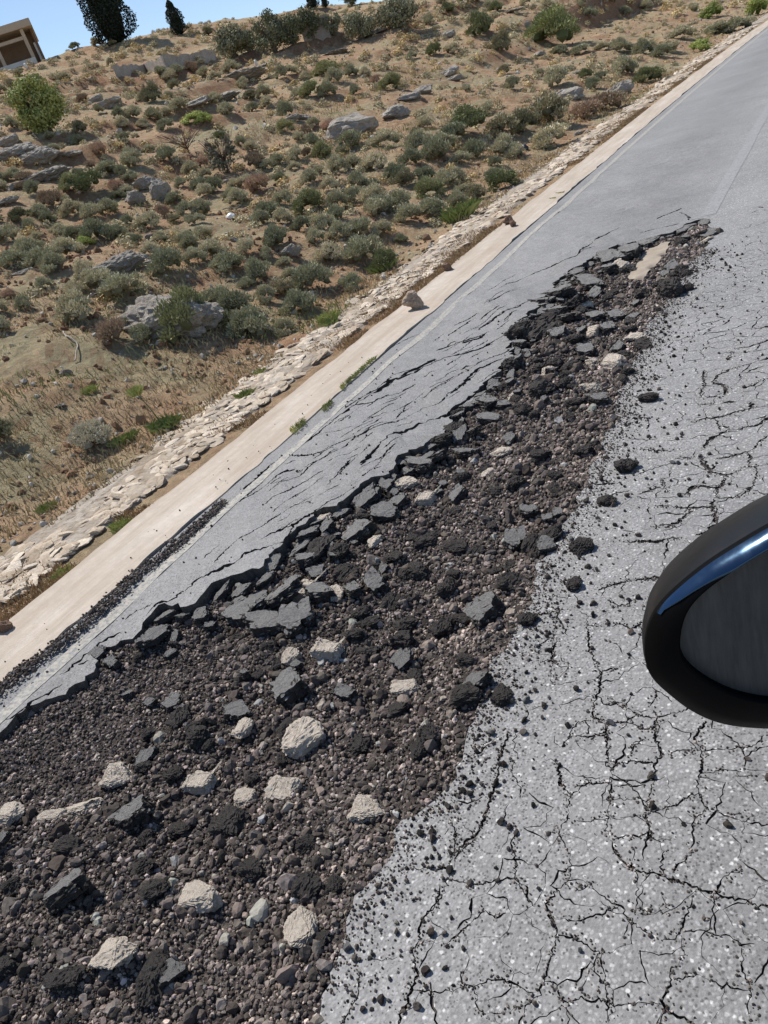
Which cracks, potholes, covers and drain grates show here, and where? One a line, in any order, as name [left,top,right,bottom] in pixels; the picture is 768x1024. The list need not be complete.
crack [340,207,768,1024]
pothole [0,219,711,1024]
